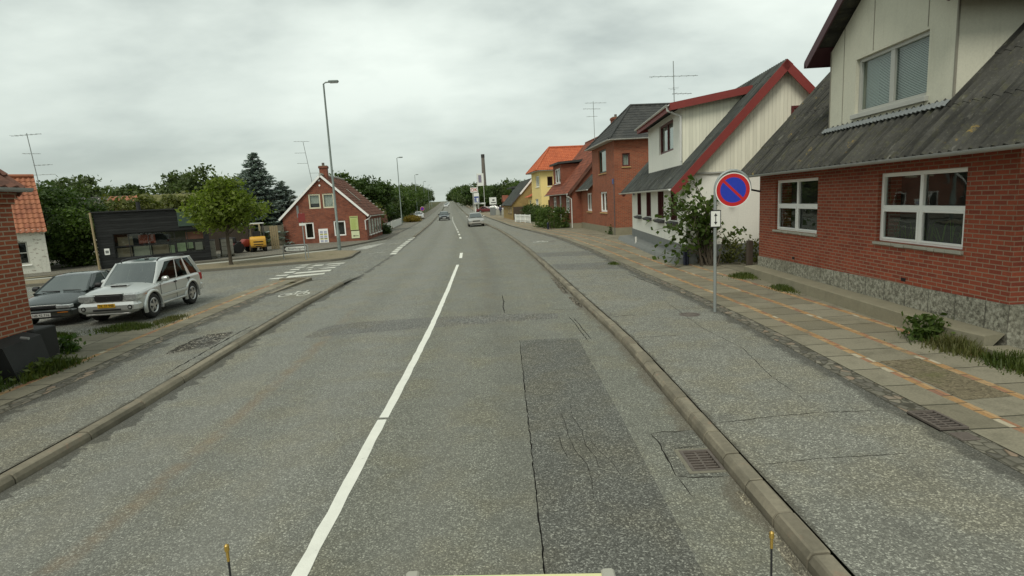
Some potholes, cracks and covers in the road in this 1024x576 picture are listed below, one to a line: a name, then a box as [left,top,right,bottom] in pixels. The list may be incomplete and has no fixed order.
crack [519,341,545,574]
crack [651,430,724,498]
drain grate [907,410,969,433]
drain grate [679,449,725,471]
crack [558,406,621,499]
